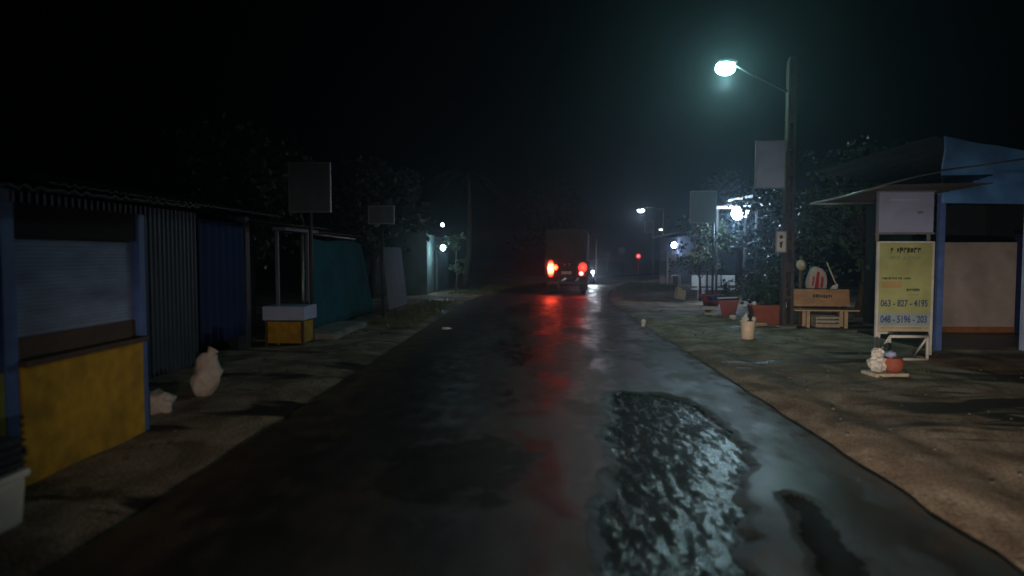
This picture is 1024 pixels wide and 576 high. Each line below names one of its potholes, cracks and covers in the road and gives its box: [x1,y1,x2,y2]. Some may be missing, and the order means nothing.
pothole [771,488,893,576]
pothole [583,390,771,576]
